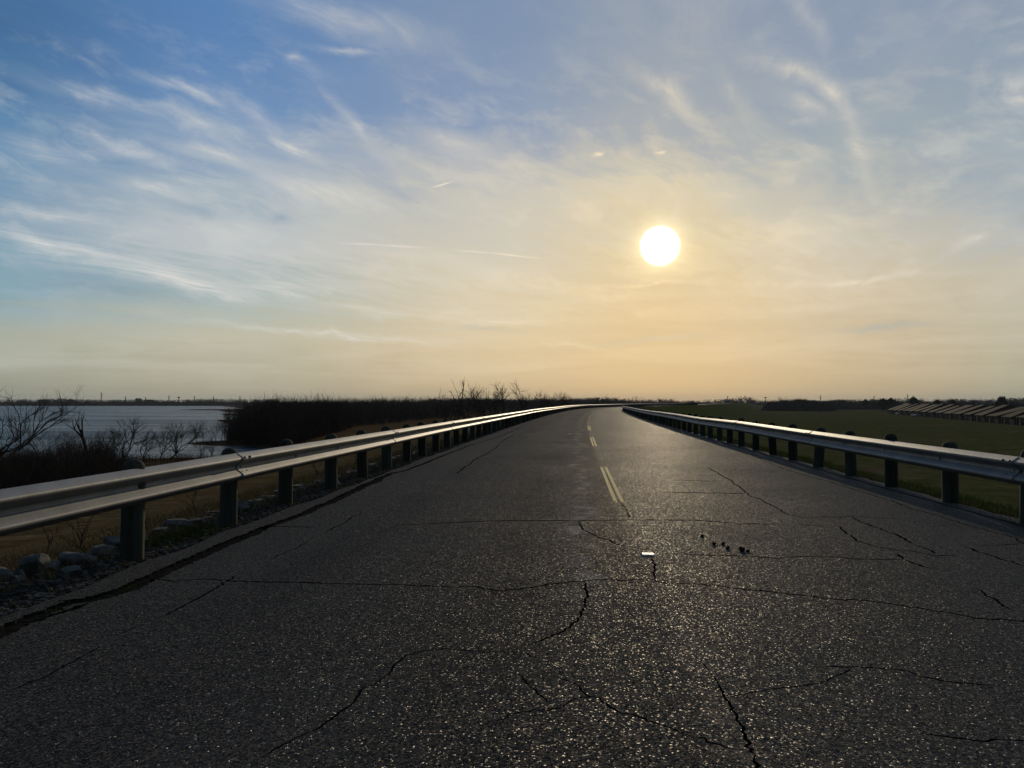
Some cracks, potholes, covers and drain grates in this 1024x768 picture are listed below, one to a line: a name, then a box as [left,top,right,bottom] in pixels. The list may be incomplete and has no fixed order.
crack [260,648,988,768]
crack [12,454,1024,690]
